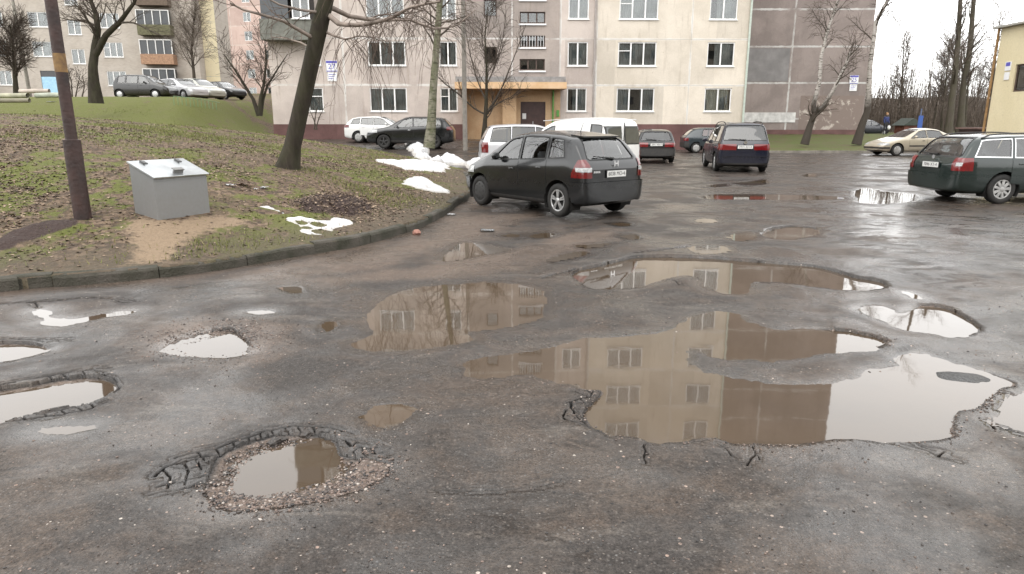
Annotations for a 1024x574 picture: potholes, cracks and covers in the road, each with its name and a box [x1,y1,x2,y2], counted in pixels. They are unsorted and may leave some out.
pothole [585,329,1015,437]
crack [556,389,619,438]
pothole [0,378,117,394]
crack [685,438,762,468]
pothole [199,435,389,511]
crack [638,440,653,465]
